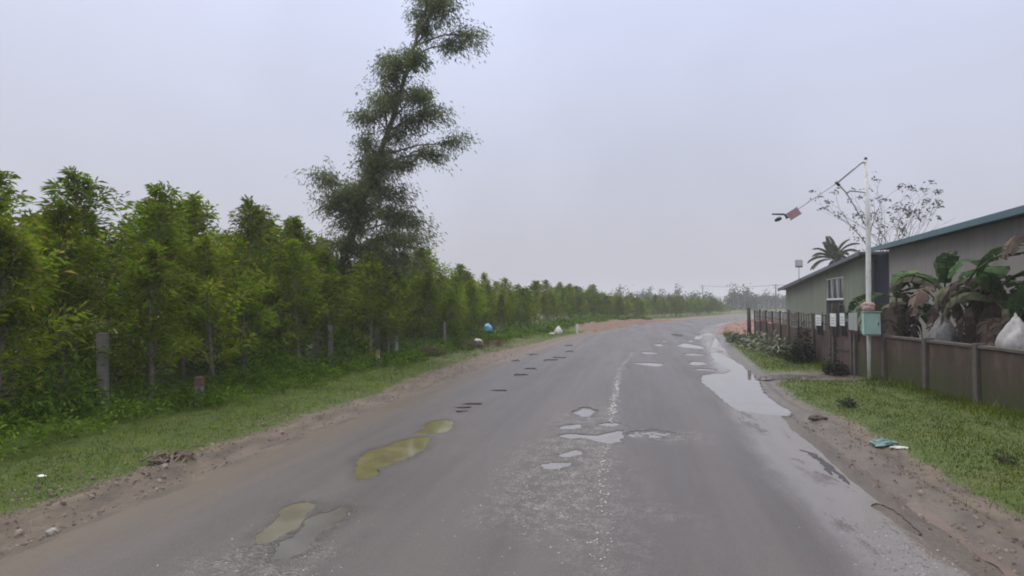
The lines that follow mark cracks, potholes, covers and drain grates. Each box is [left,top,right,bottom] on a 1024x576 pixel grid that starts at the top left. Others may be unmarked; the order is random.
pothole [572,407,598,417]
pothole [558,430,625,444]
pothole [623,429,677,438]
pothole [416,419,454,434]
pothole [354,436,431,481]
